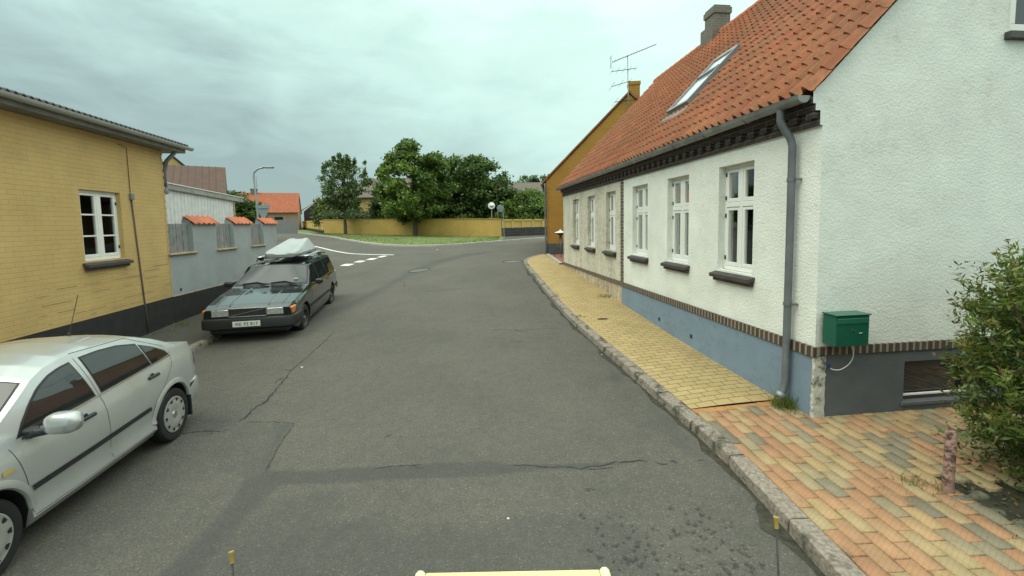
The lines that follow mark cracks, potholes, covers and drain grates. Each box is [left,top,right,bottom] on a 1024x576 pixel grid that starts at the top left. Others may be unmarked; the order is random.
crack [250,421,294,470]
crack [529,460,677,470]
